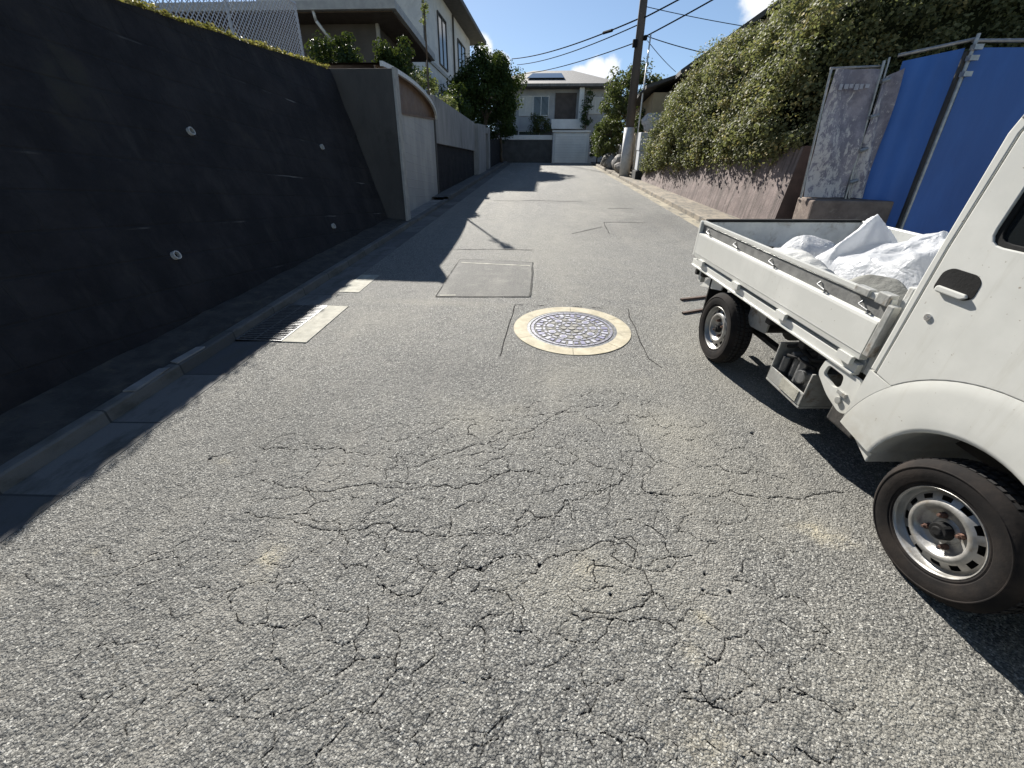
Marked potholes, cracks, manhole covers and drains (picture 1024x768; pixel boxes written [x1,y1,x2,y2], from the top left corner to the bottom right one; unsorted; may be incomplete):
drain grate [235,304,349,343]
manhole cover [514,307,631,355]
crack [54,390,868,768]
